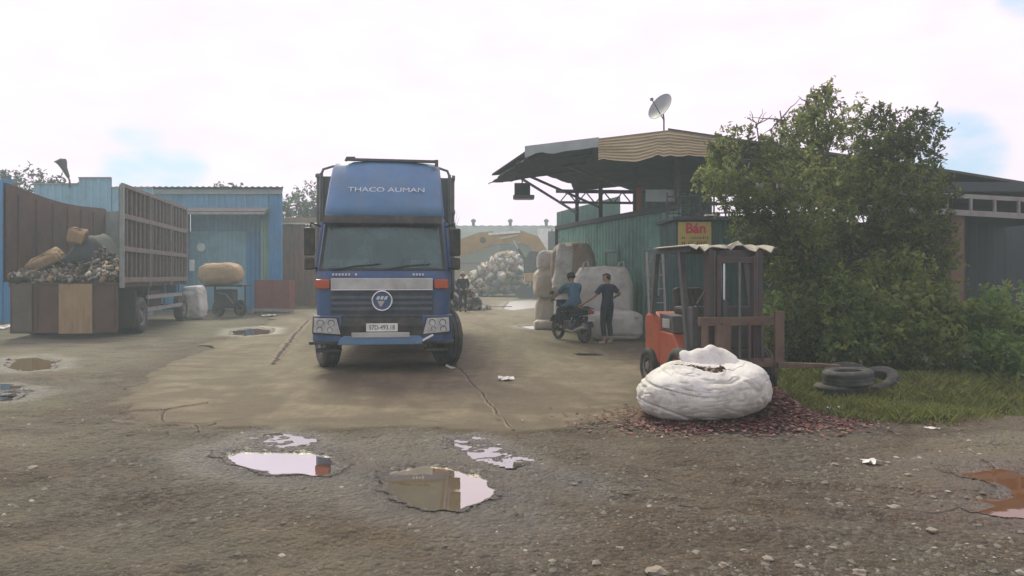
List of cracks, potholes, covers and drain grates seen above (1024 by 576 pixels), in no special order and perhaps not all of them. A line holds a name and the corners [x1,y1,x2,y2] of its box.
pothole [0,392,27,401]
pothole [375,461,503,512]
pothole [208,445,354,477]
pothole [228,327,276,337]
pothole [938,460,1024,519]
pothole [4,355,59,371]
crack [111,402,216,437]
